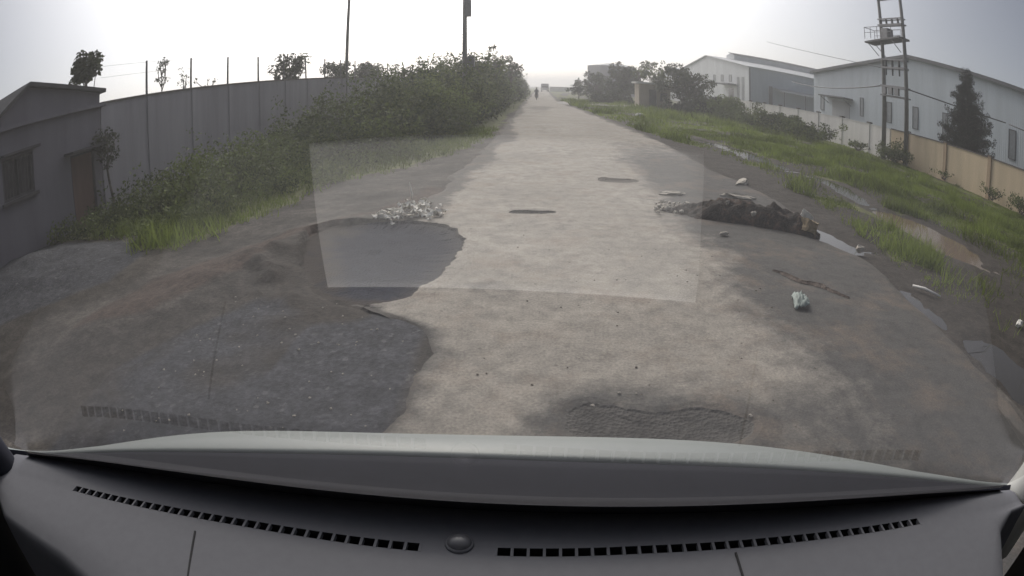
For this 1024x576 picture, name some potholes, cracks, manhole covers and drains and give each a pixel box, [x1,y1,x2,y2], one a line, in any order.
pothole [588,176,648,184]
pothole [528,387,783,448]
crack [772,269,850,299]
pothole [495,207,570,217]
